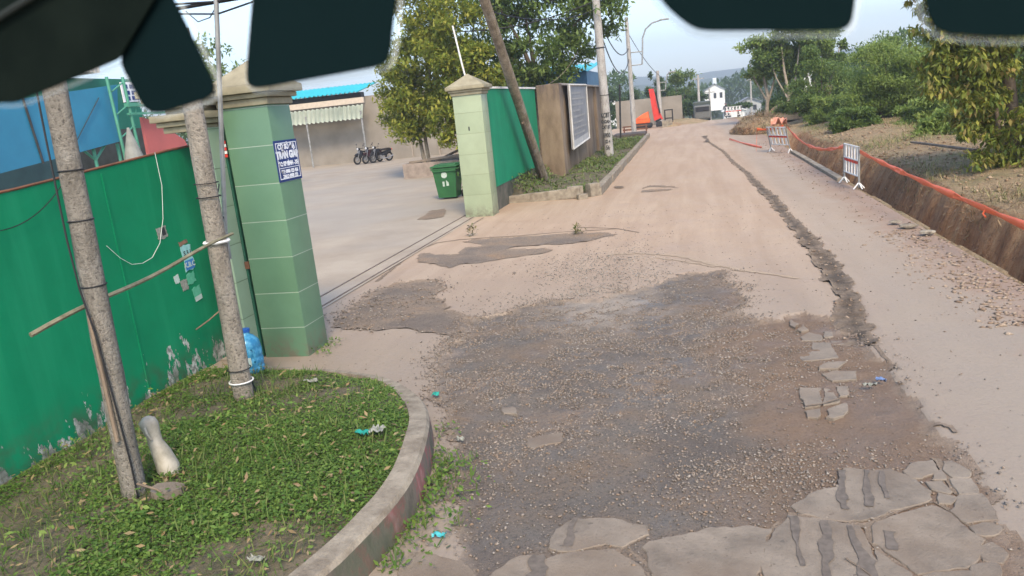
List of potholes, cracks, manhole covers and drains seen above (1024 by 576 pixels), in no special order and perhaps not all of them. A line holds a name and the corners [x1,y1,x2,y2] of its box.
crack [806,389,858,406]
pothole [331,279,476,337]
pothole [426,269,1024,576]
crack [757,458,988,576]
crack [708,141,900,368]
